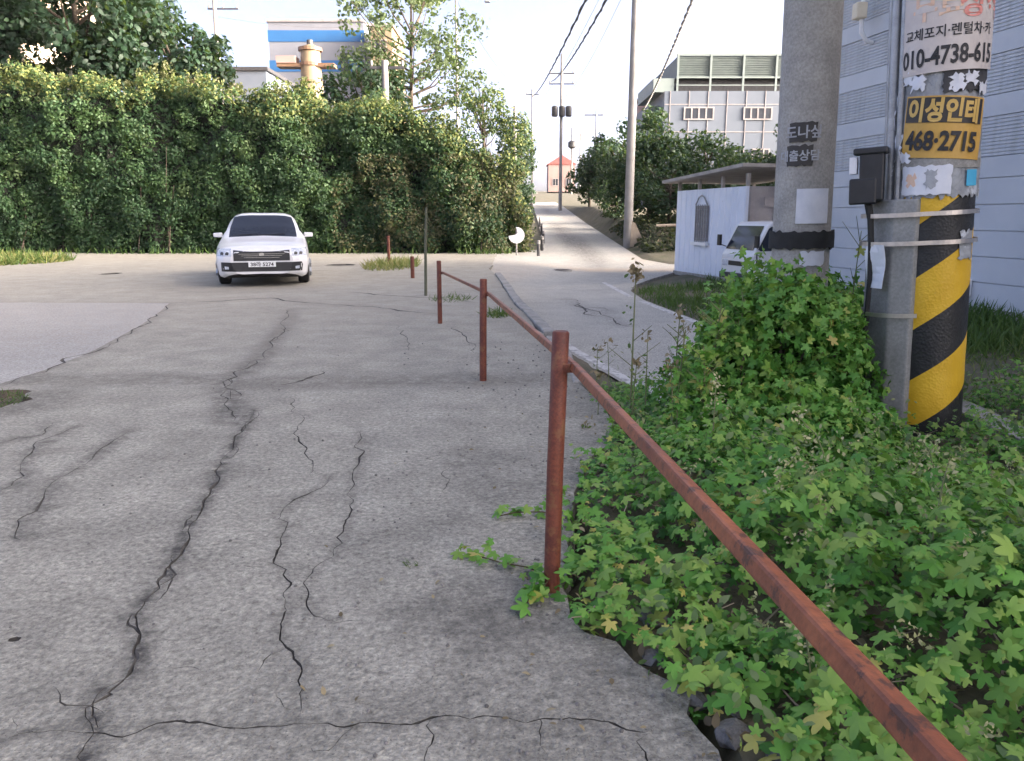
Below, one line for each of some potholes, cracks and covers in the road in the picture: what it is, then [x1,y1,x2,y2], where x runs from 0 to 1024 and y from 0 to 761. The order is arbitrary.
crack [574,300,624,326]
crack [8,309,683,761]
crack [148,292,470,350]
